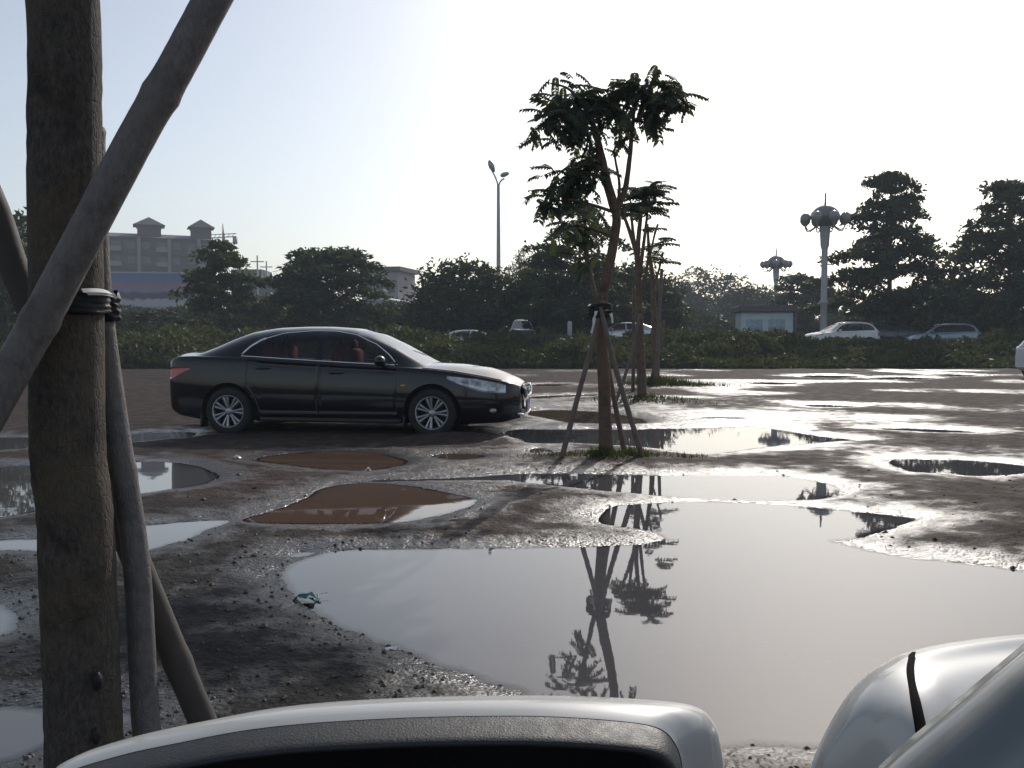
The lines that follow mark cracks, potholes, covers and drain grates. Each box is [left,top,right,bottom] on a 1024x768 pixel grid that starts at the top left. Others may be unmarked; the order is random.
pothole [246,449,417,471]
pothole [0,592,39,637]
pothole [514,445,559,453]
pothole [0,458,233,518]
pothole [0,514,240,554]
pothole [876,456,1024,476]
